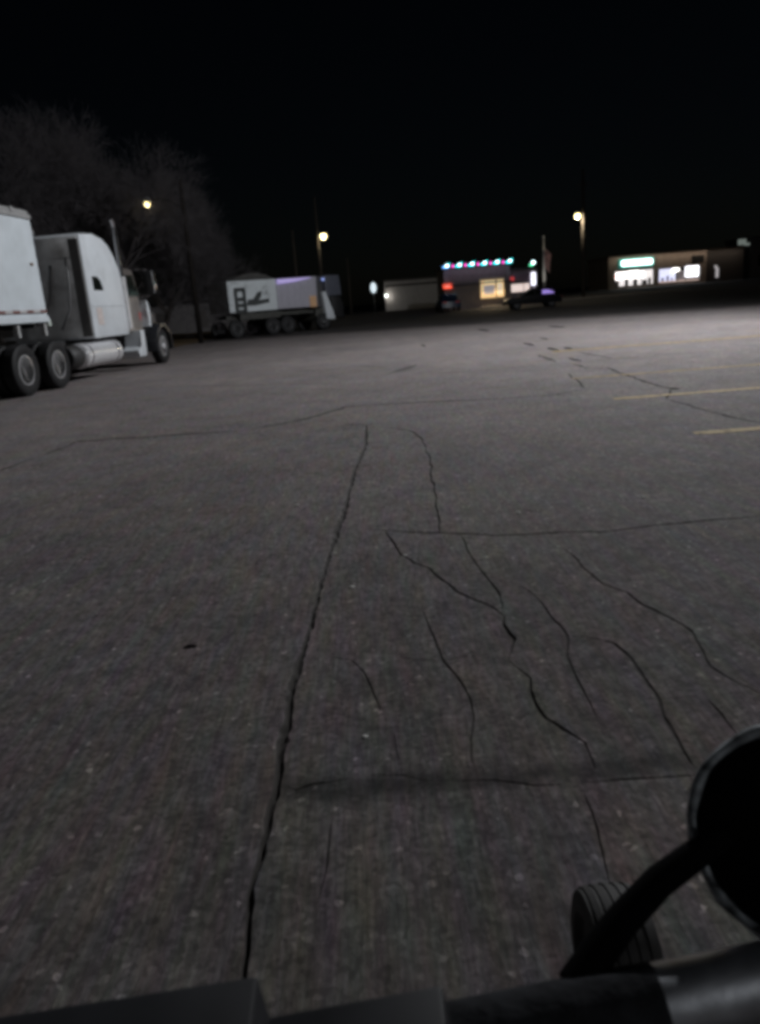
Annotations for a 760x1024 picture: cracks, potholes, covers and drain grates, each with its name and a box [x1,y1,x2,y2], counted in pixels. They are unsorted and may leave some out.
crack [0,352,760,471]
crack [333,657,381,710]
crack [316,815,333,908]
crack [371,428,760,772]
